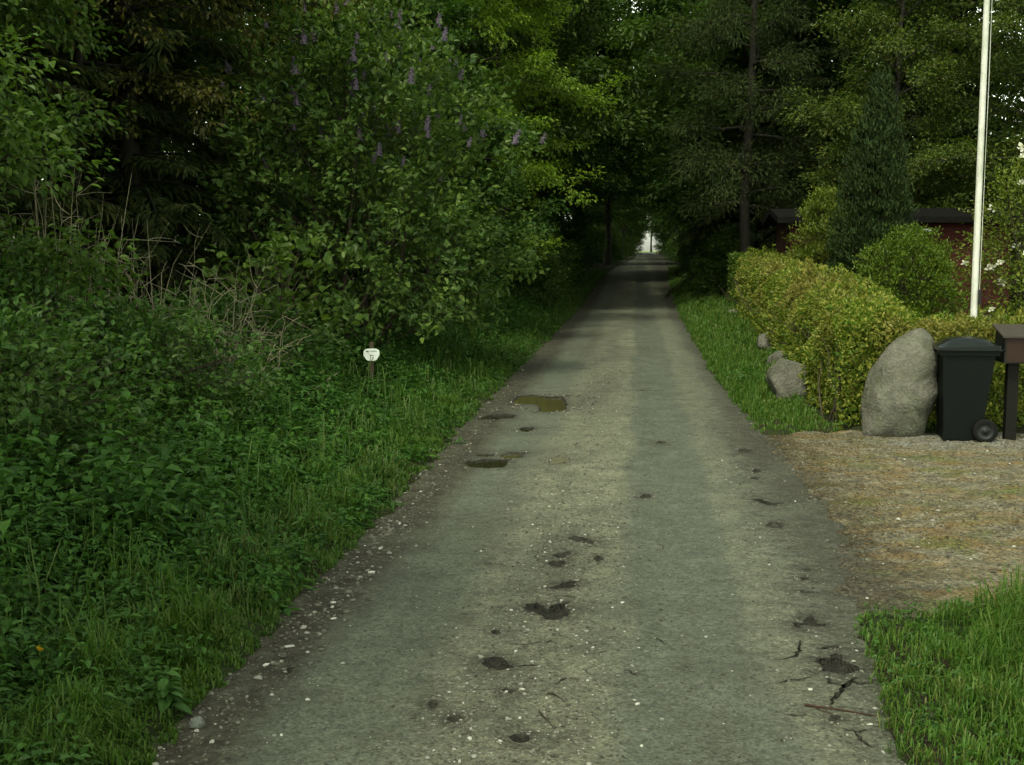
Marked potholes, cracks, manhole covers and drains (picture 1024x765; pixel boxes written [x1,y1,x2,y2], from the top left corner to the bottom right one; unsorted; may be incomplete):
crack [774,640,874,705]
pothole [464,459,511,468]
pothole [523,602,571,620]
pothole [568,535,594,545]
pothole [793,616,827,629]
crack [843,728,872,748]
pothole [509,734,529,743]
pothole [813,653,860,675]
pothole [482,656,514,670]
pothole [512,395,568,412]
pothole [550,580,577,589]
